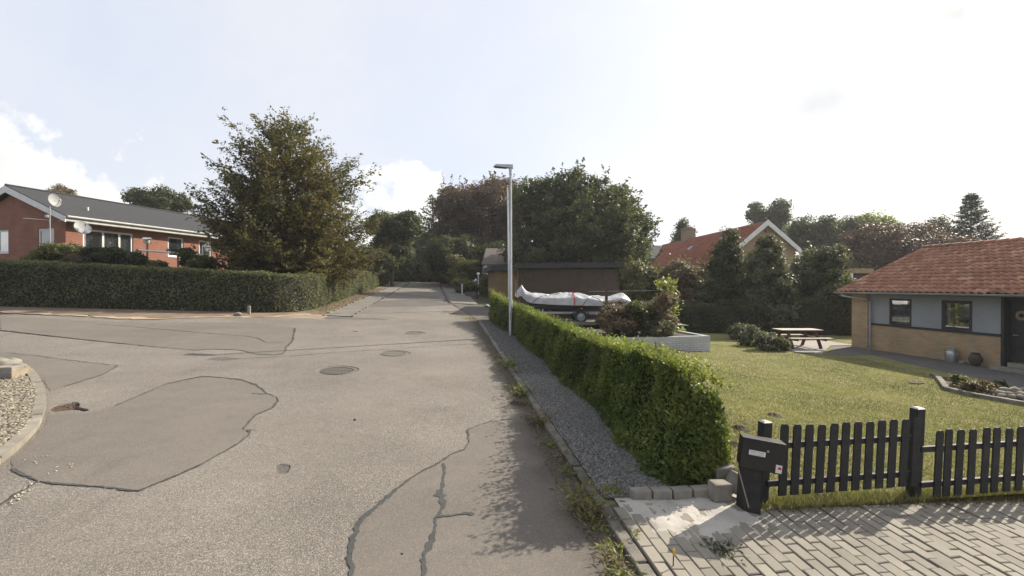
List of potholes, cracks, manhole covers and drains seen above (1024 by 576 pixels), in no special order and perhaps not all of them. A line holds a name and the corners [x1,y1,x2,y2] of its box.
manhole cover [315,366,359,375]
pothole [49,402,89,412]
